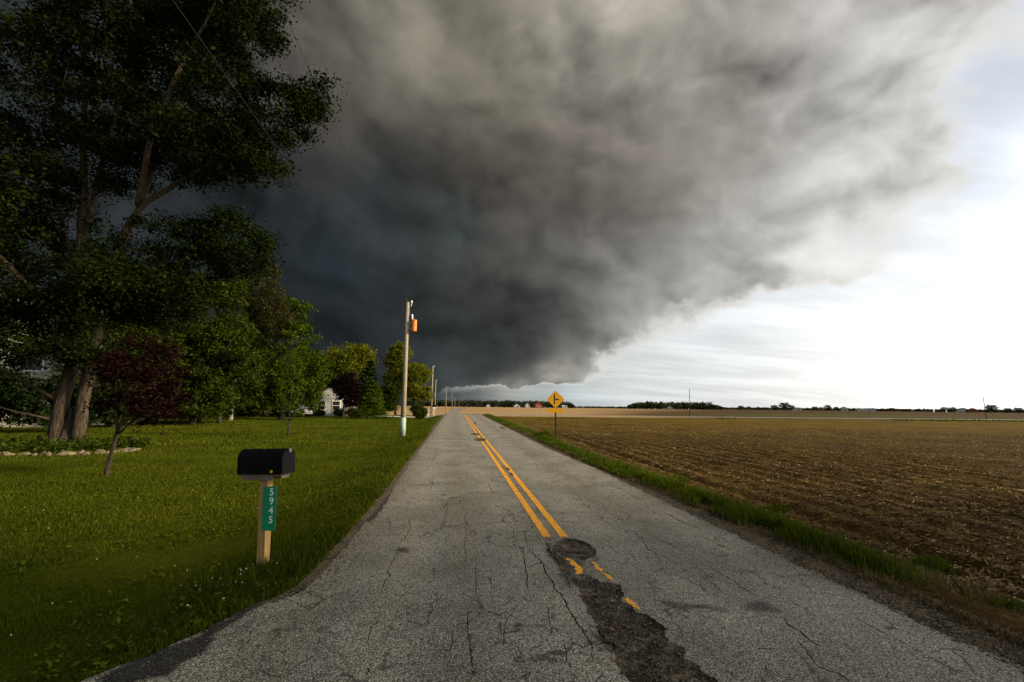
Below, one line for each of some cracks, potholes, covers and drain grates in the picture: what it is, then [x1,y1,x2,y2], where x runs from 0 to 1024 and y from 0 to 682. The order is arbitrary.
crack [856,618,967,677]
crack [565,484,753,596]
crack [513,508,616,673]
crack [381,520,417,593]
crack [757,603,848,681]
crack [428,454,495,680]
